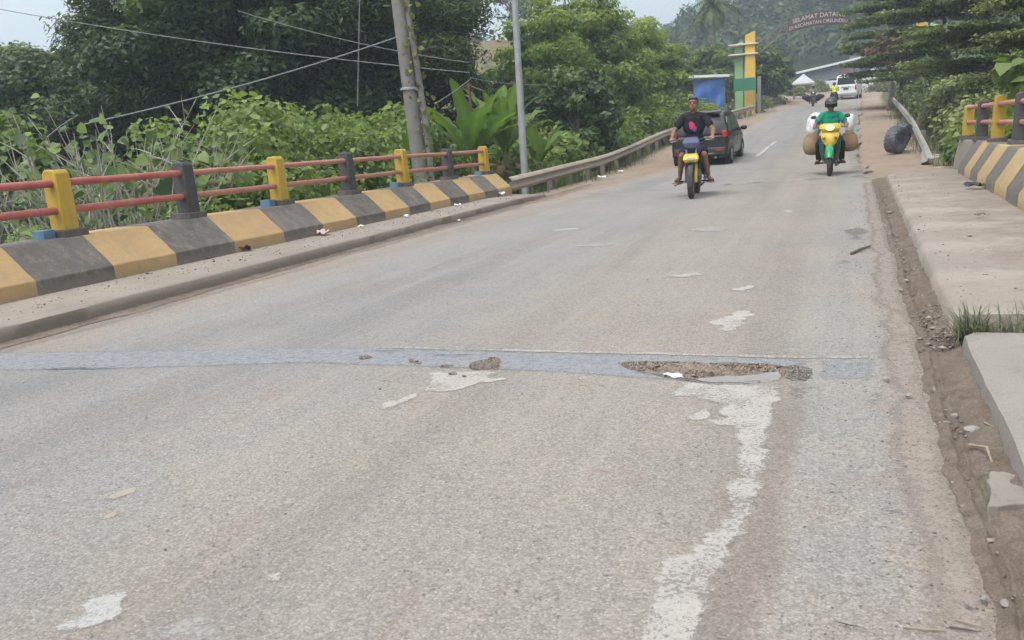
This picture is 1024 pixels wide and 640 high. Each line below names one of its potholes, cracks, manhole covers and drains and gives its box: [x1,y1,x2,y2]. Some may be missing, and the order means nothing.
pothole [618,360,788,384]
pothole [785,365,813,381]
